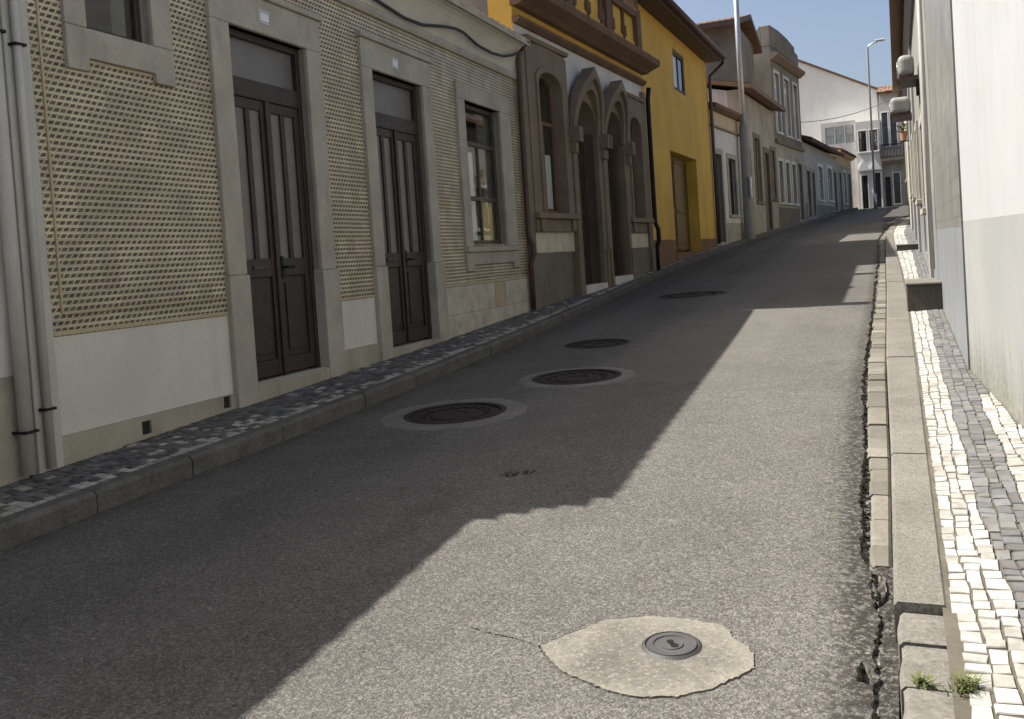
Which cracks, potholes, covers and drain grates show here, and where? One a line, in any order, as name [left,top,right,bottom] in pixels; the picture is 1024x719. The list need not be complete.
manhole cover [518,367,637,388]
manhole cover [656,291,726,299]
manhole cover [564,339,631,349]
crack [860,225,899,719]
crack [471,627,534,646]
manhole cover [380,398,529,430]
